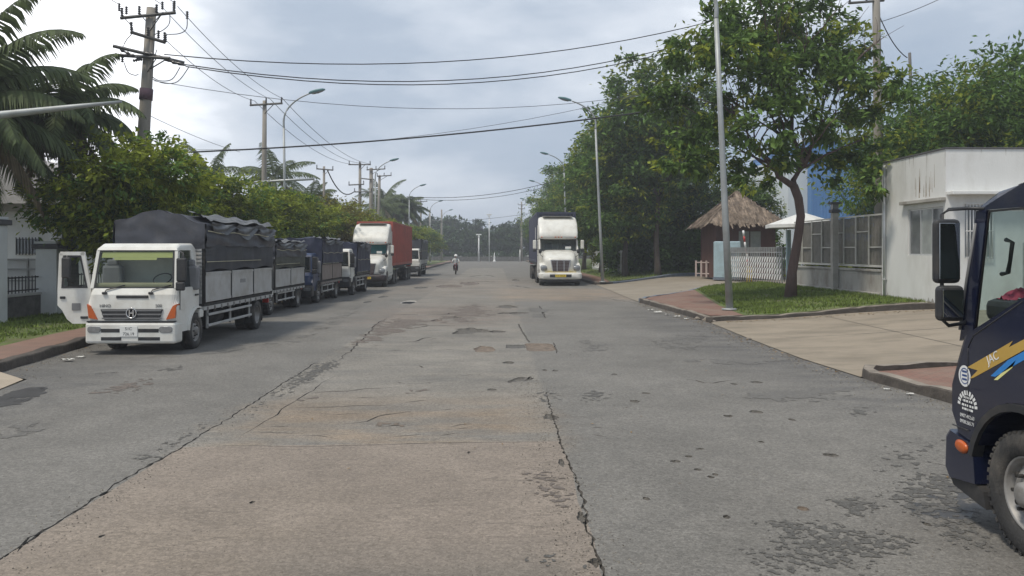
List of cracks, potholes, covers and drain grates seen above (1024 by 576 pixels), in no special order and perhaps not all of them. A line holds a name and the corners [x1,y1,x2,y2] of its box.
crack [239,382,483,447]
